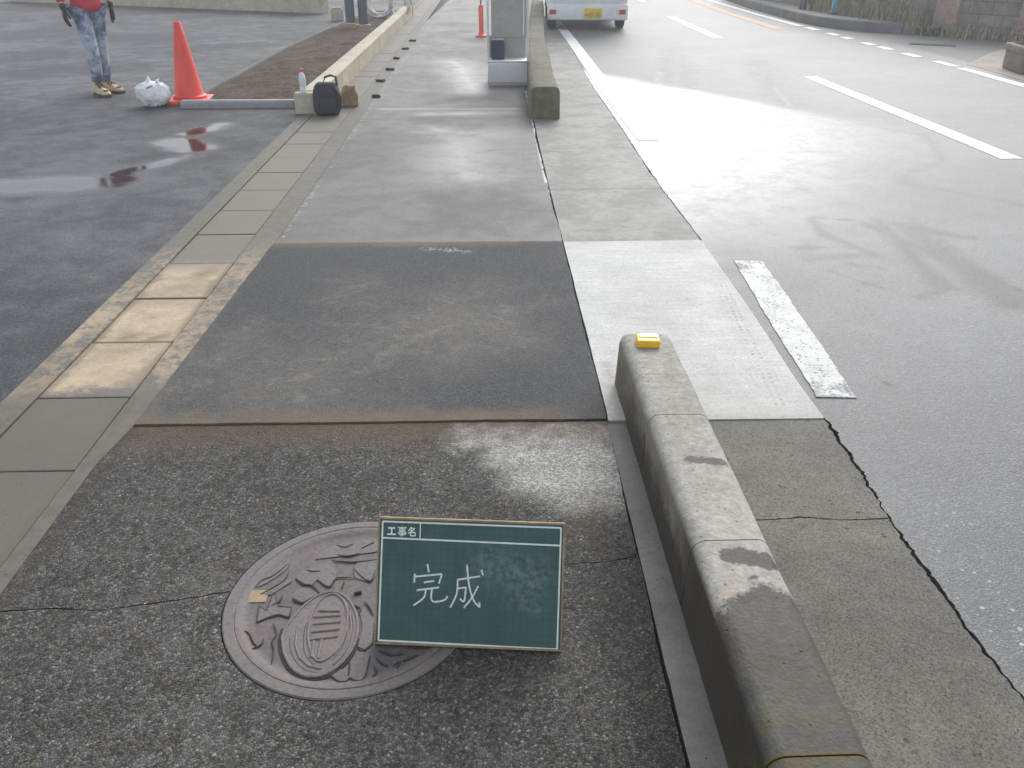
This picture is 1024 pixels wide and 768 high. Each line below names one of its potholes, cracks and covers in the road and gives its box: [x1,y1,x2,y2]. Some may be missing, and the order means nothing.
crack [0,592,231,612]
crack [756,422,1024,701]
manhole cover [222,521,458,702]
